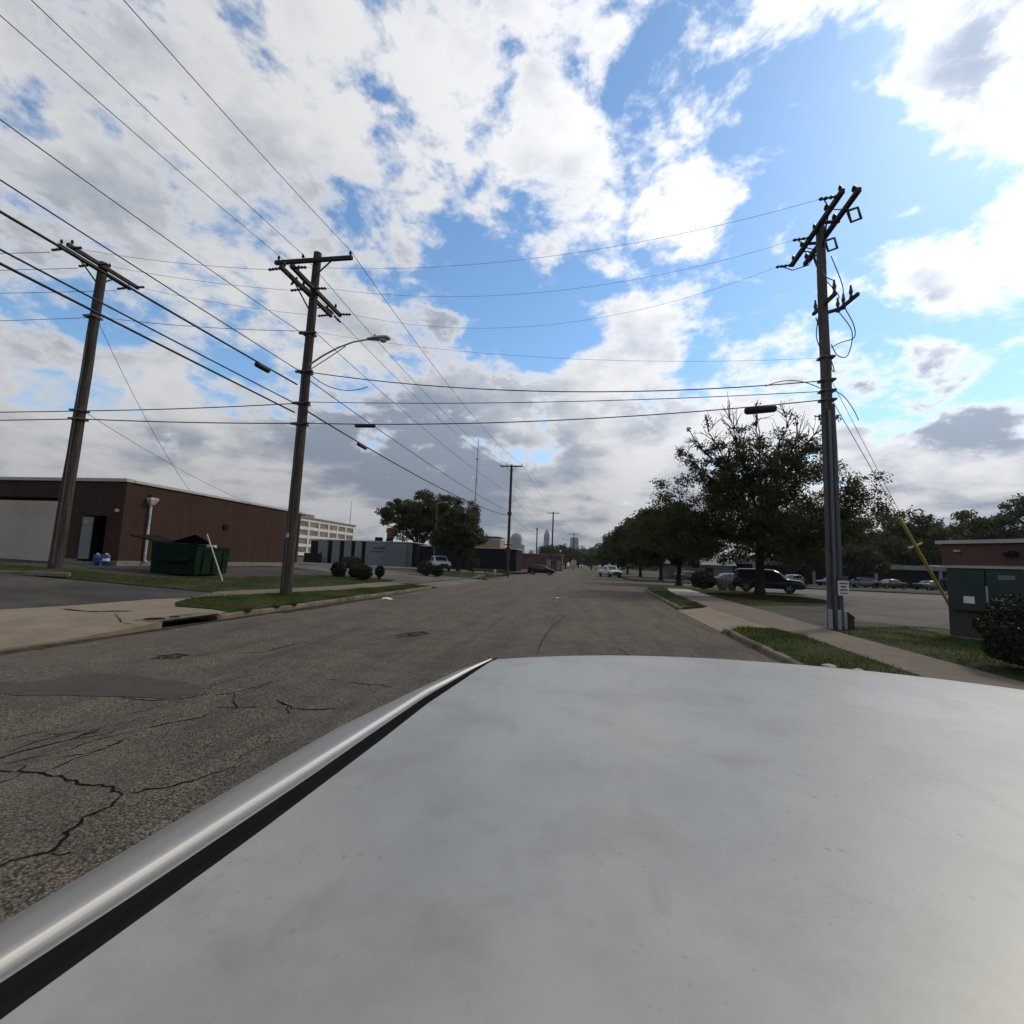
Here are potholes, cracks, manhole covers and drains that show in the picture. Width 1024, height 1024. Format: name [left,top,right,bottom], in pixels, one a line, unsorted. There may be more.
drain grate [135,612,222,628]
crack [0,681,337,866]
